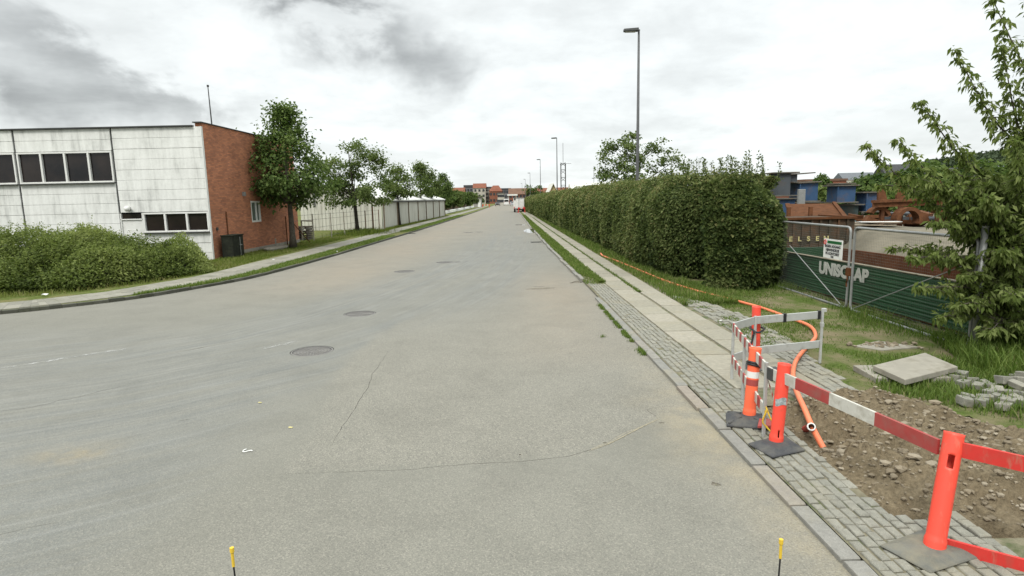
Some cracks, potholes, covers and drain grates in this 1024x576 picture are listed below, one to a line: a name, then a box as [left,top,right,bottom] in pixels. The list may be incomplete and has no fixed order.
manhole cover [290,346,334,356]
